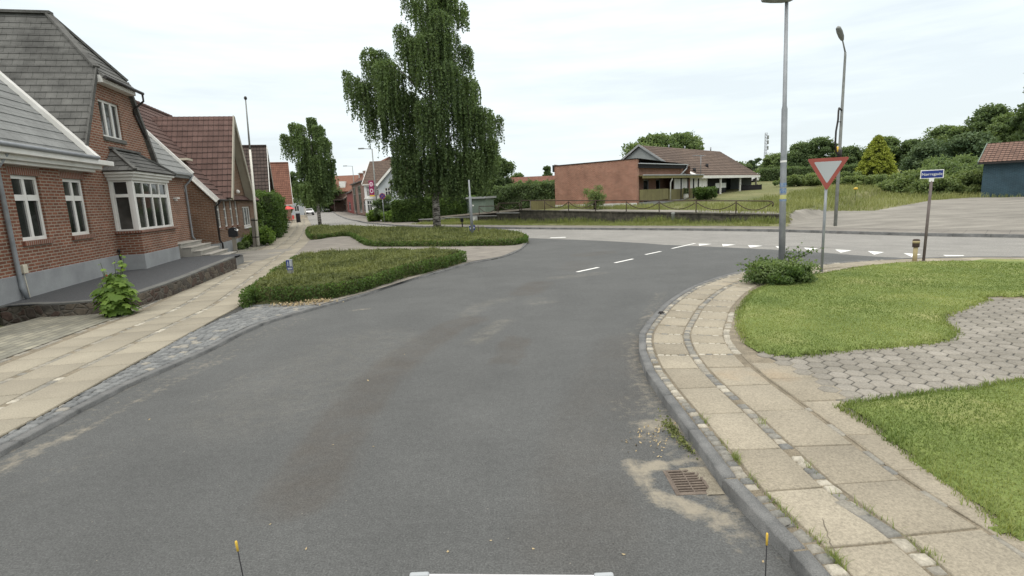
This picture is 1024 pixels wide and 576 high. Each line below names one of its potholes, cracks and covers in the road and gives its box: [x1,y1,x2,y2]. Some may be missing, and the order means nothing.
drain grate [663,469,709,496]
